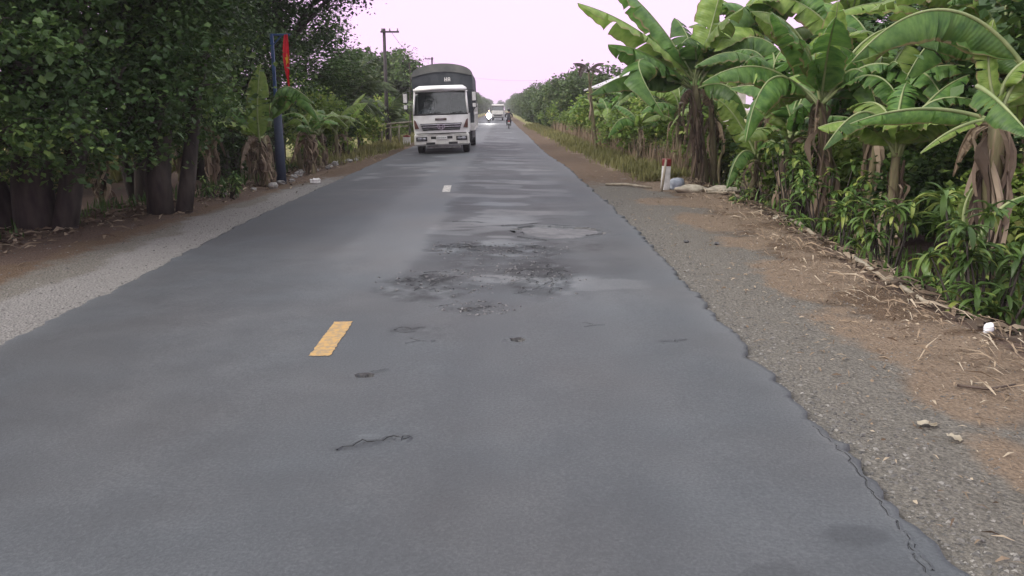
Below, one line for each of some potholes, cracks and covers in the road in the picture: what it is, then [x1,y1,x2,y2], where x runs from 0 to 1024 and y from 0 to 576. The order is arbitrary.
pothole [505,336,530,344]
crack [811,425,936,576]
pothole [349,371,380,380]
crack [335,433,413,451]
